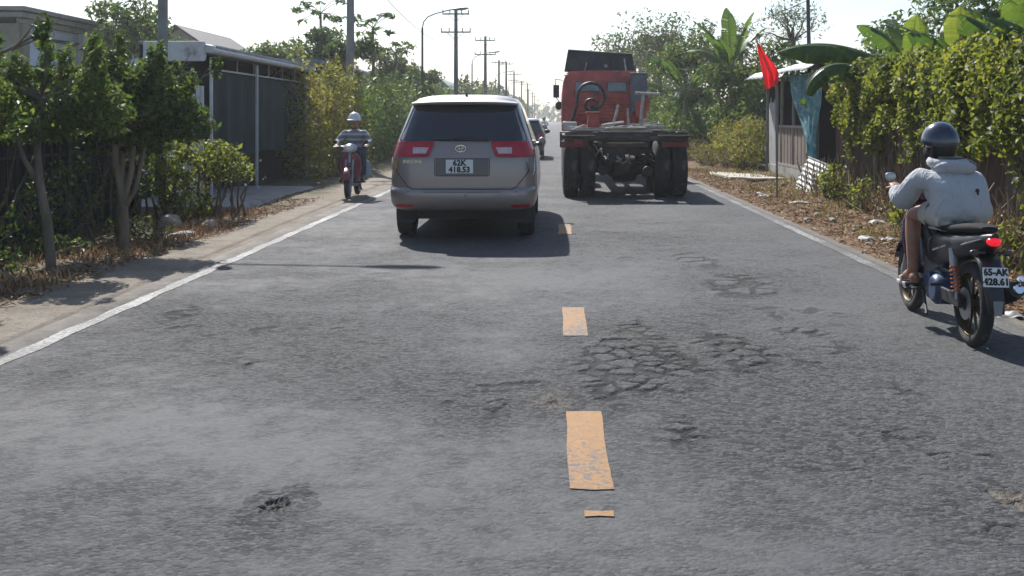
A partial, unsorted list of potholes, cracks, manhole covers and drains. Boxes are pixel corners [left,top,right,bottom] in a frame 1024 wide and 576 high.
pothole [226,483,322,528]
crack [418,251,1021,483]
